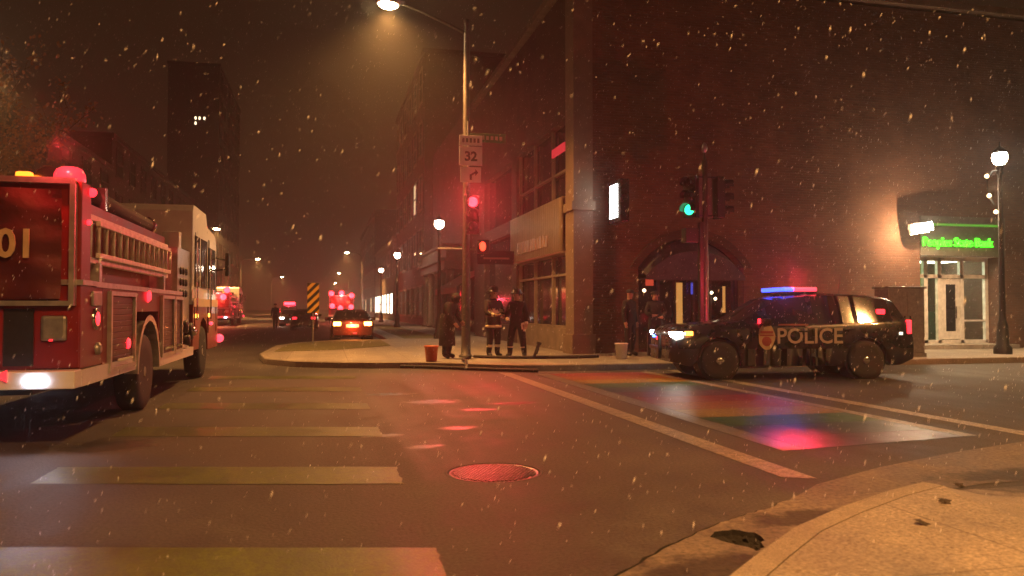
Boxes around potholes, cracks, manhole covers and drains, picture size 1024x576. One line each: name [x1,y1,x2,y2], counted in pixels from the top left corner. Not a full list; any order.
manhole cover [445,463,544,483]
